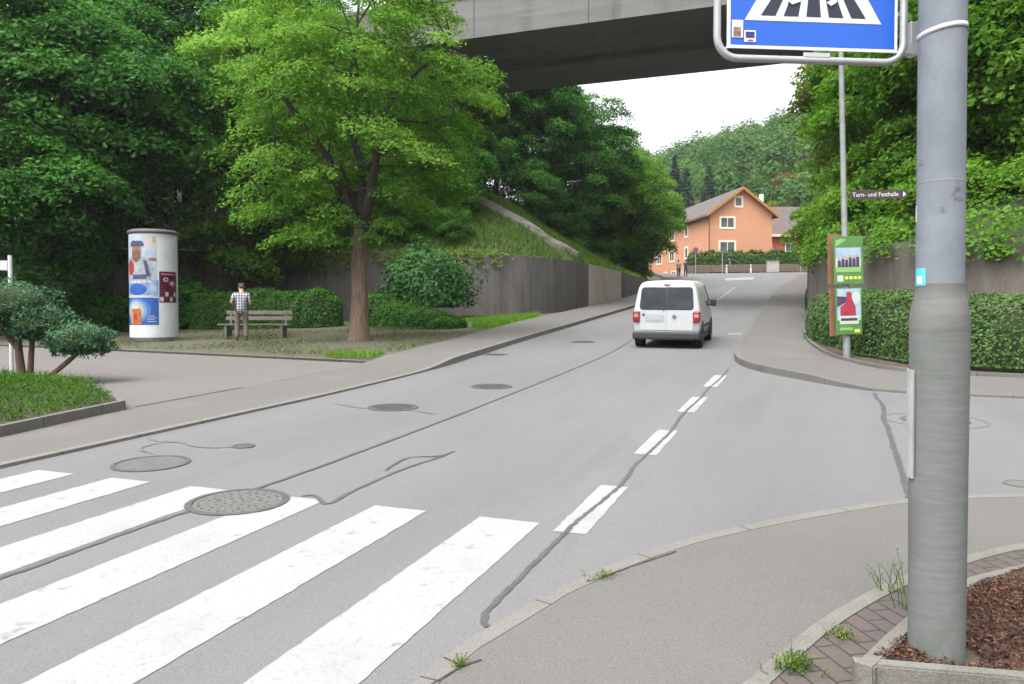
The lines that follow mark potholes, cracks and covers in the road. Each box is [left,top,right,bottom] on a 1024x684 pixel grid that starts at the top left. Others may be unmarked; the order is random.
manhole cover [185,488,290,516]
manhole cover [110,455,191,472]
manhole cover [885,413,991,429]
manhole cover [1002,480,1024,488]
manhole cover [367,403,418,412]
